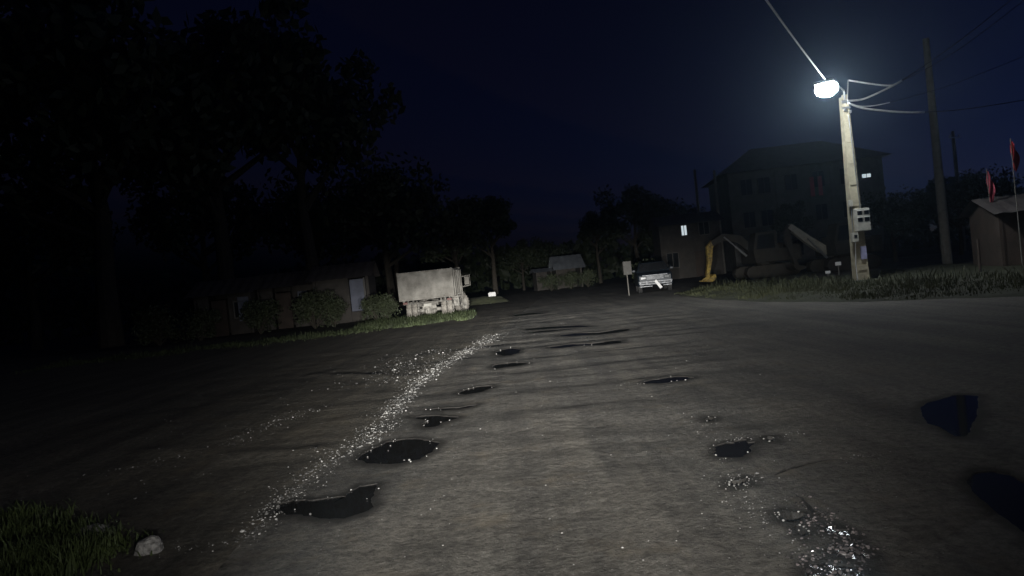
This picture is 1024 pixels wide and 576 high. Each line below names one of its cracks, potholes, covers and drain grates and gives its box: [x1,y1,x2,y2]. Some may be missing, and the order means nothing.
pothole [776,510,808,522]
pothole [728,476,750,486]
pothole [558,327,638,336]
pothole [644,376,694,384]
pothole [548,340,623,348]
pothole [713,439,755,458]
pothole [920,394,979,437]
pothole [822,524,851,536]
crack [775,458,844,475]
pothole [802,558,870,576]
pothole [827,538,875,560]
pothole [456,385,496,394]
